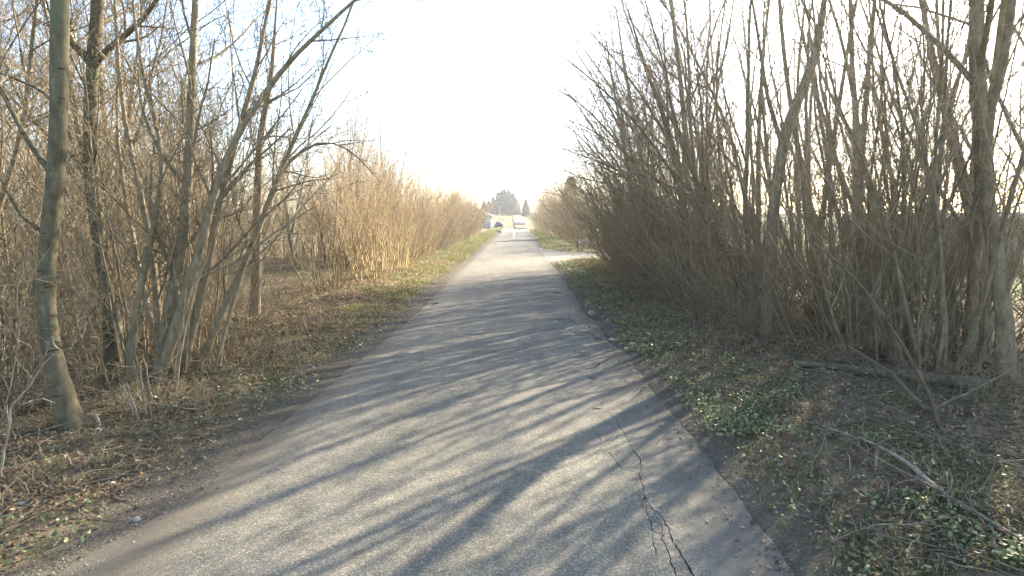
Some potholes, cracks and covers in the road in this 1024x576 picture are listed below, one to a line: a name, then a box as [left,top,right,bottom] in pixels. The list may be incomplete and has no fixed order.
crack [593,411,695,576]
